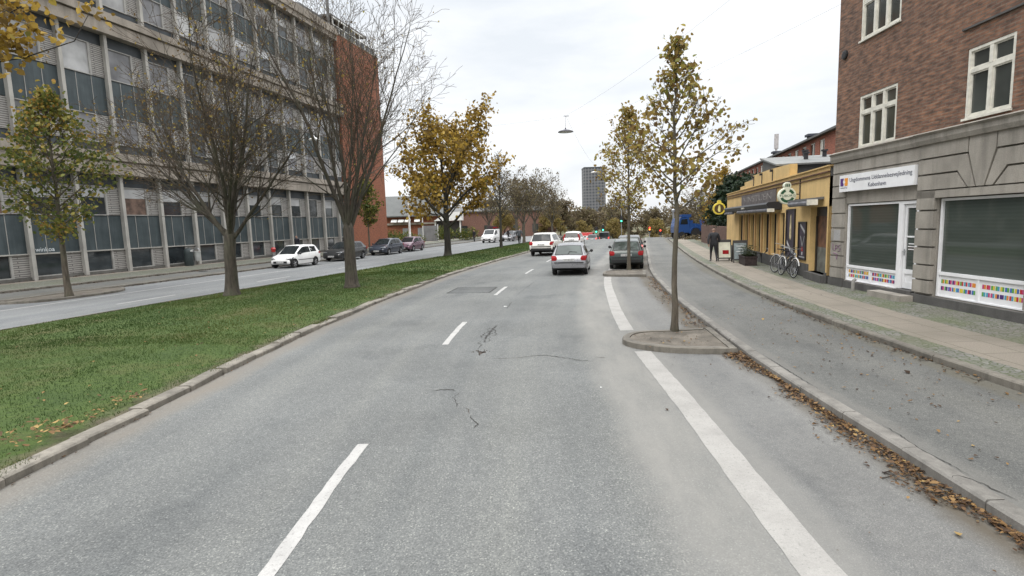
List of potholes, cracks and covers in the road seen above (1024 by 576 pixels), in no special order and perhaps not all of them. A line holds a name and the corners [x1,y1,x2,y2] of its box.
crack [478,324,606,361]
